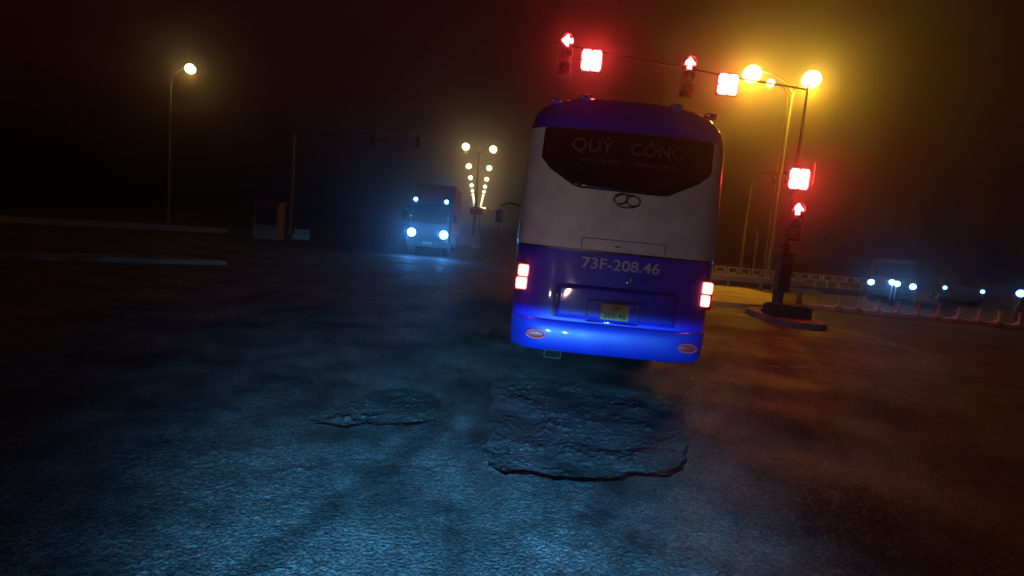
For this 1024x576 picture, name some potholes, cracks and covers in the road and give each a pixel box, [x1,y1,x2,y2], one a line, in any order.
pothole [309,389,444,428]
pothole [482,376,694,482]
